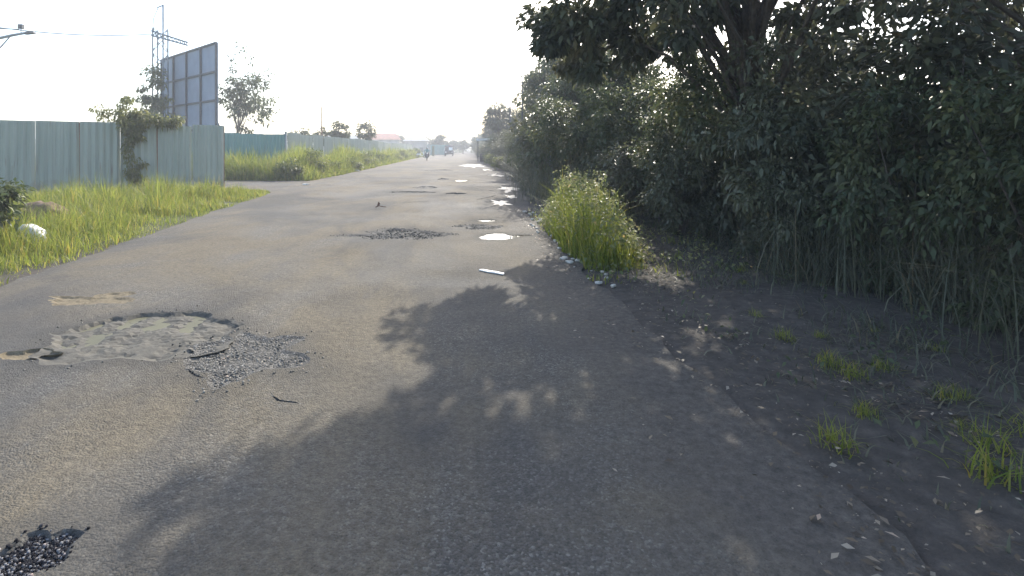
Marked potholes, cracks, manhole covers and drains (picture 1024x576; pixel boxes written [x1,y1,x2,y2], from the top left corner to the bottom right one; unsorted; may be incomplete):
pothole [338,228,453,239]
pothole [0,348,63,360]
pothole [28,310,245,365]
pothole [183,332,311,390]
pothole [0,529,85,576]
